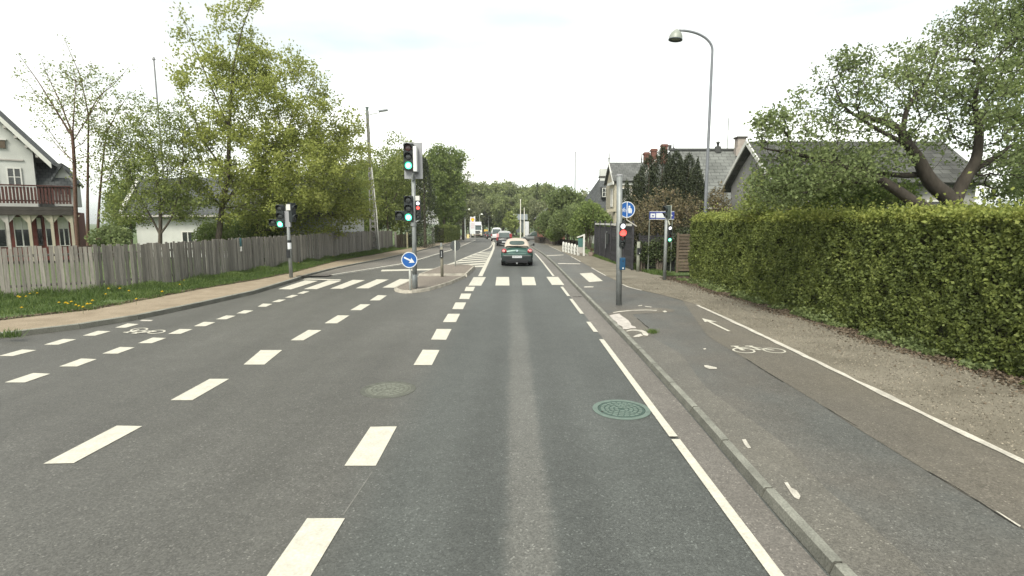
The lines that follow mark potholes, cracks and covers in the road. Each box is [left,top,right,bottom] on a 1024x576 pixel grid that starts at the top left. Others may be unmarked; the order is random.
manhole cover [360,381,416,399]
manhole cover [592,399,651,420]
